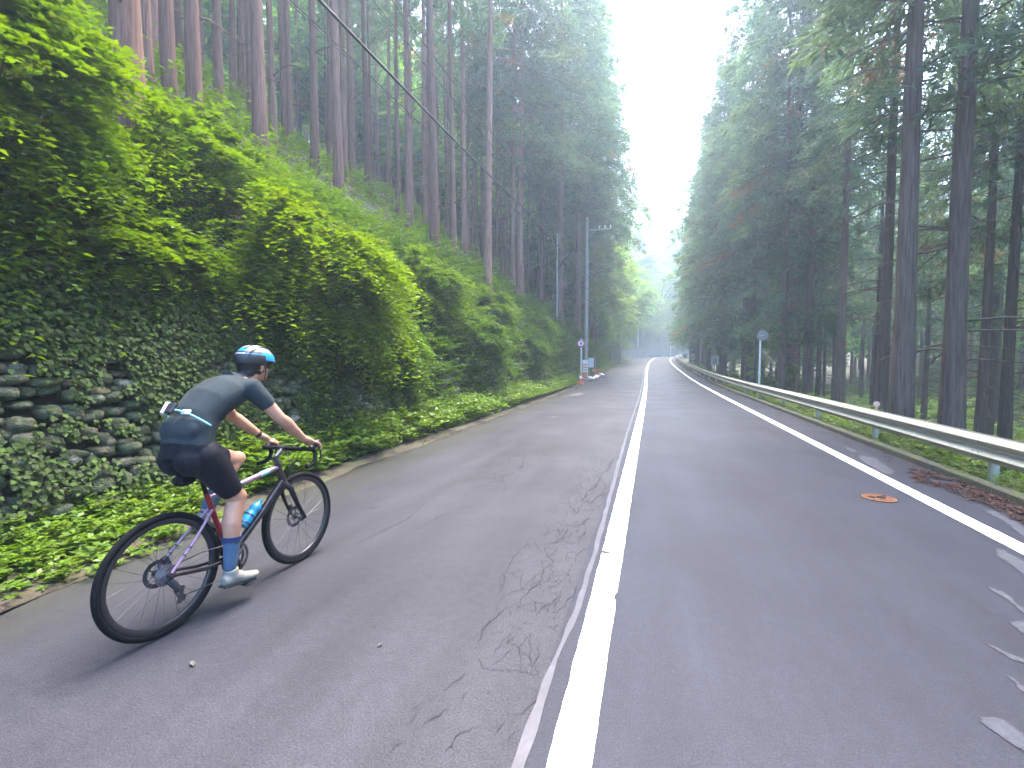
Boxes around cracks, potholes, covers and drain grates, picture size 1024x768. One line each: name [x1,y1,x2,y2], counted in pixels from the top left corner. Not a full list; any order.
manhole cover [860,493,899,503]
crack [406,672,473,752]
crack [448,440,616,674]
